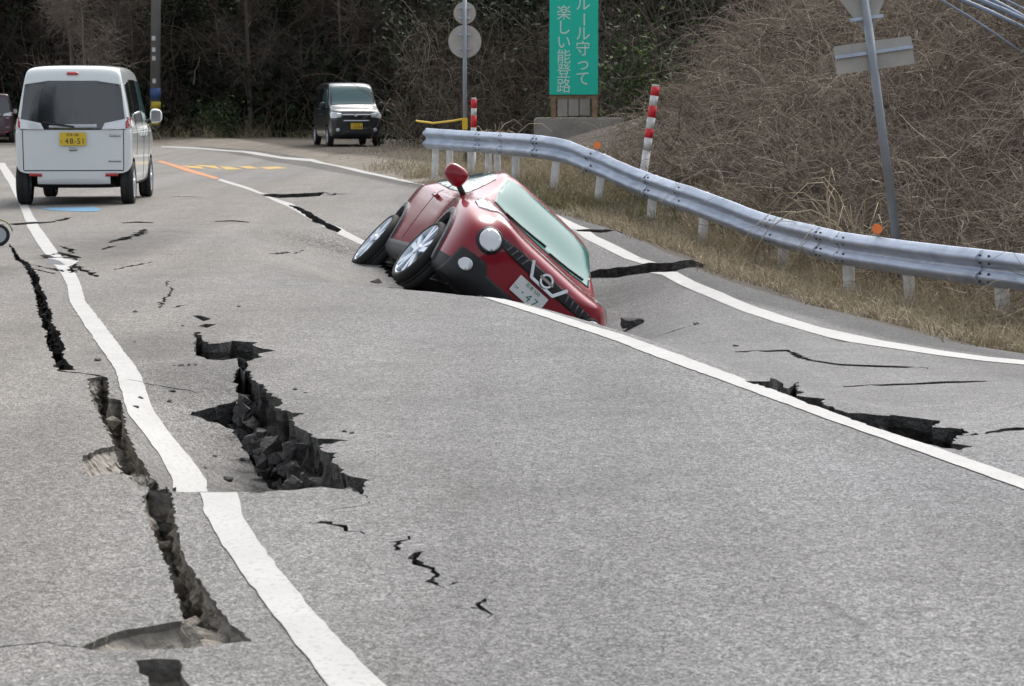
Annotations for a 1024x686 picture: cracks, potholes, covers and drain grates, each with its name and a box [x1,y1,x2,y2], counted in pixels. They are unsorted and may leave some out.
crack [0,221,370,686]
crack [590,260,704,278]
crack [471,597,493,618]
crack [735,350,1024,450]
crack [393,536,458,588]
crack [264,192,341,233]
